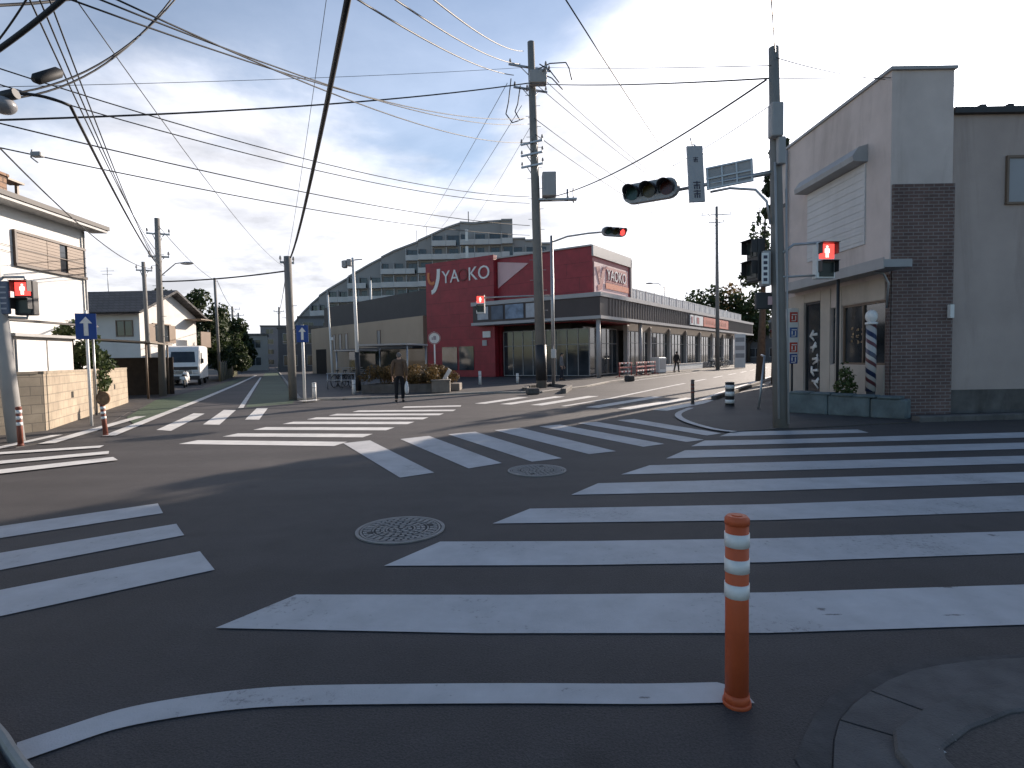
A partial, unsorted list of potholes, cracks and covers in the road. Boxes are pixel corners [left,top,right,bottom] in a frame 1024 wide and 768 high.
manhole cover [508,464,566,477]
manhole cover [355,516,445,544]
